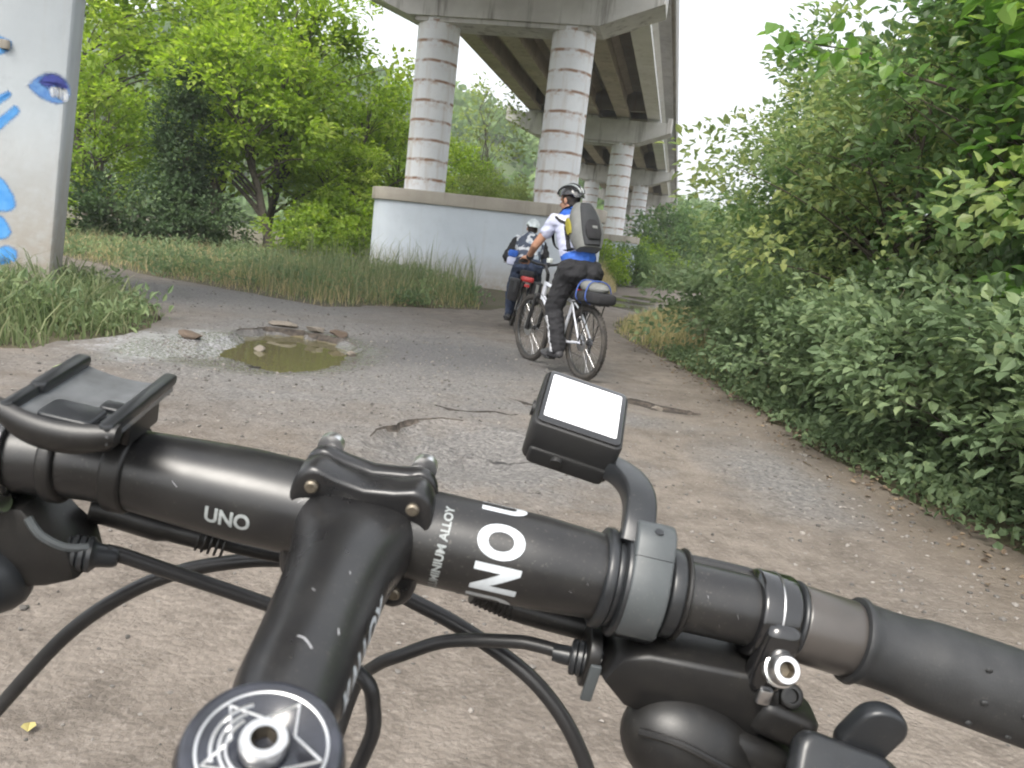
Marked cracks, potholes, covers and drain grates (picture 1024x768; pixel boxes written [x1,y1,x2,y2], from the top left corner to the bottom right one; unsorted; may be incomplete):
crack [435,398,532,415]
pothole [196,326,365,373]
